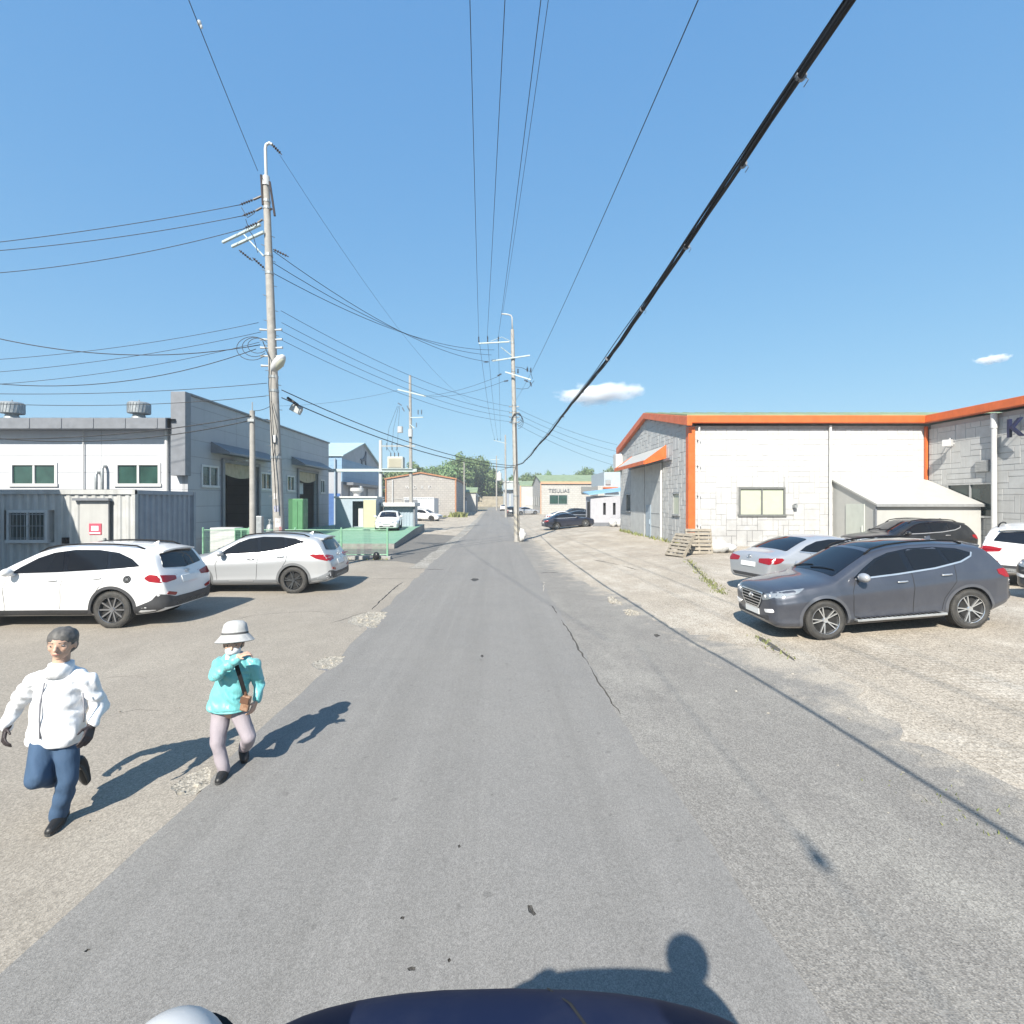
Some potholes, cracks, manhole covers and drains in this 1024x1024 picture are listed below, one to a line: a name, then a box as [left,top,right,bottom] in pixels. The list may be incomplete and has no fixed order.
crack [235,578,400,623]
